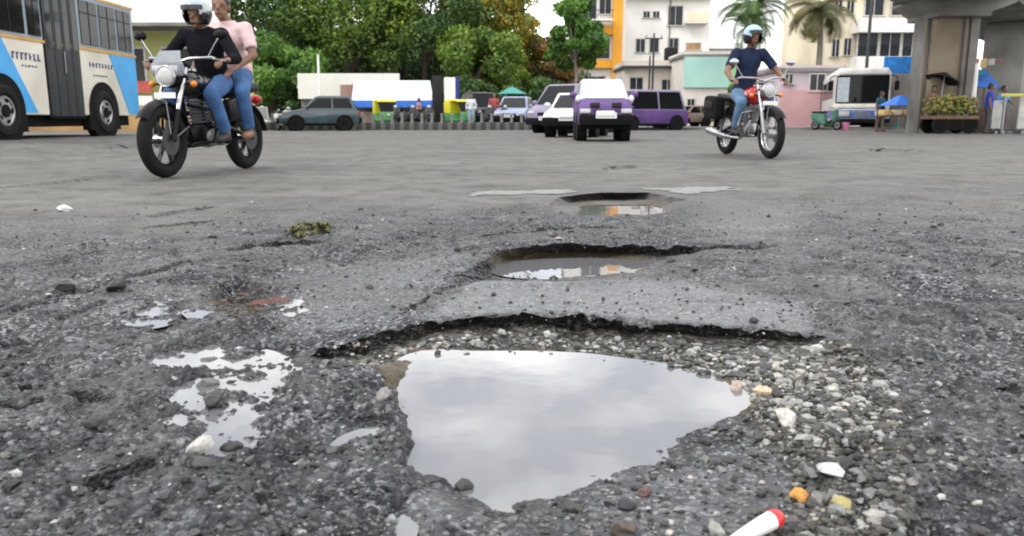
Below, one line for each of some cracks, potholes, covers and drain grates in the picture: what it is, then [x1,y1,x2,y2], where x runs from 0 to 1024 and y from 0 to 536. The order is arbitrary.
pothole [427,243,723,299]
crack [139,207,218,229]
pothole [540,192,689,217]
pothole [284,312,908,536]
